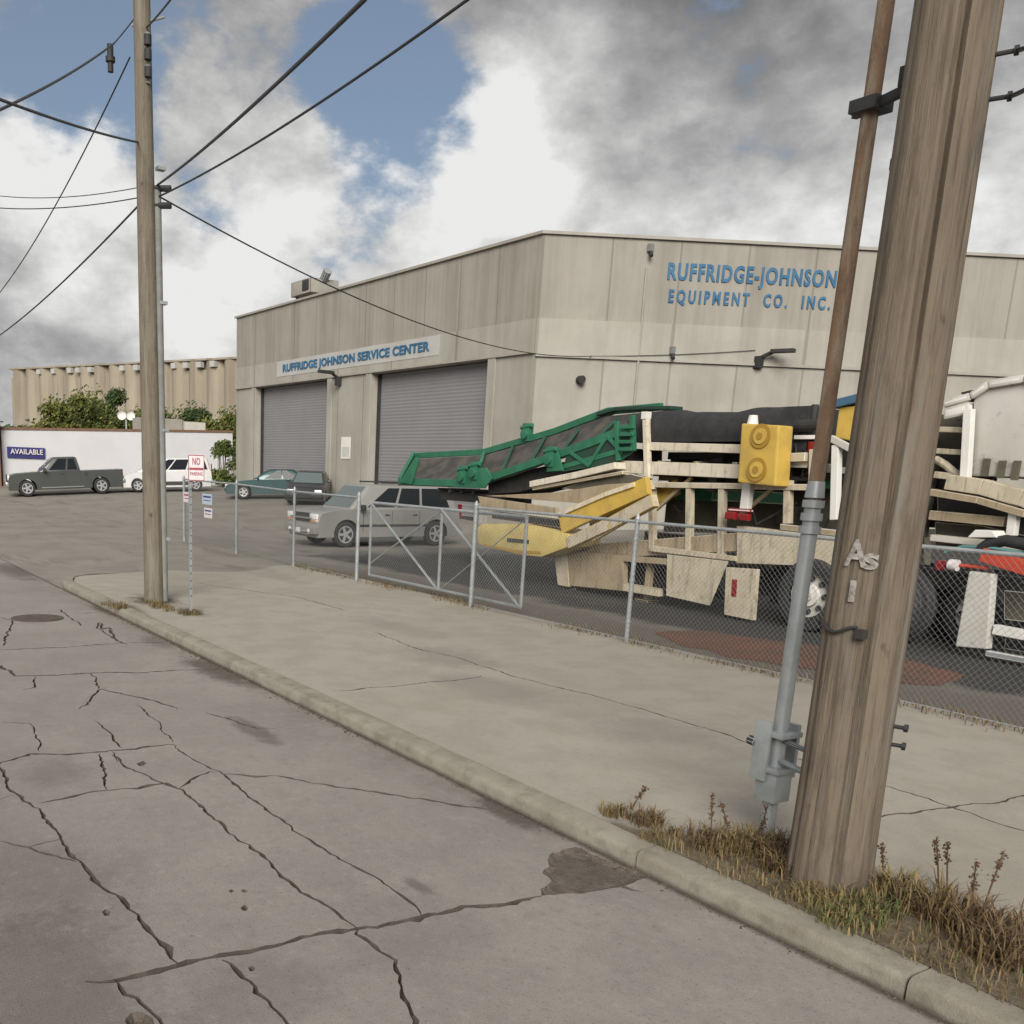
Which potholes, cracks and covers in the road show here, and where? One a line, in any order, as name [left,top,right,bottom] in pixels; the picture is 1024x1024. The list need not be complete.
crack [0,609,542,1024]
manhole cover [11,614,64,622]
